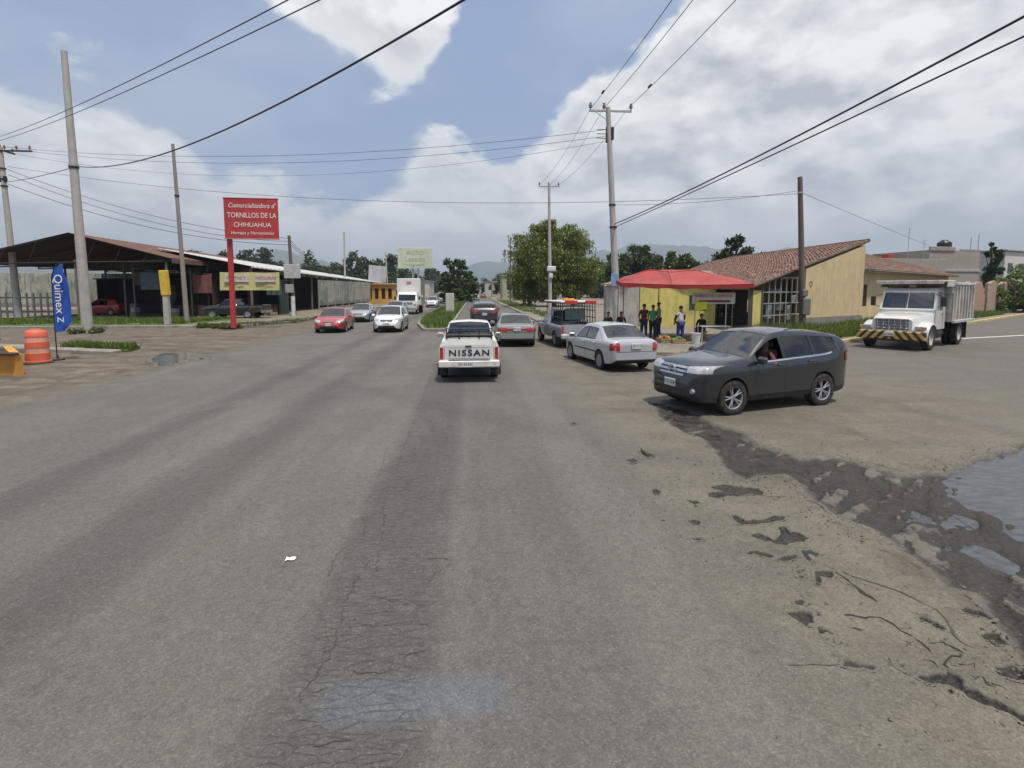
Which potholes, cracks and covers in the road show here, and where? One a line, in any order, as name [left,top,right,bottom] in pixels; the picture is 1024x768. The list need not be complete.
crack [836,571,1020,694]
pothole [643,400,1024,665]
crack [298,380,449,760]
pothole [145,352,186,368]
